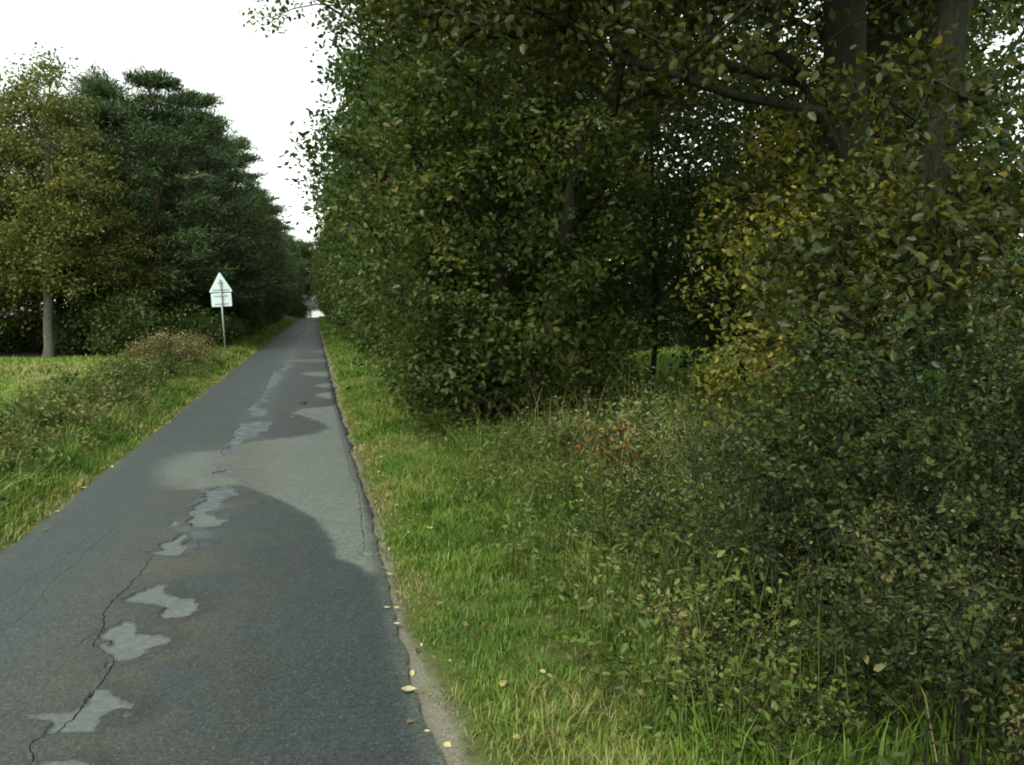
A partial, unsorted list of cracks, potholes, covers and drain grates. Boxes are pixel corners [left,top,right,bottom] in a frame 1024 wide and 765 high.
crack [334,408,365,553]
crack [10,523,118,627]
crack [29,558,152,765]
